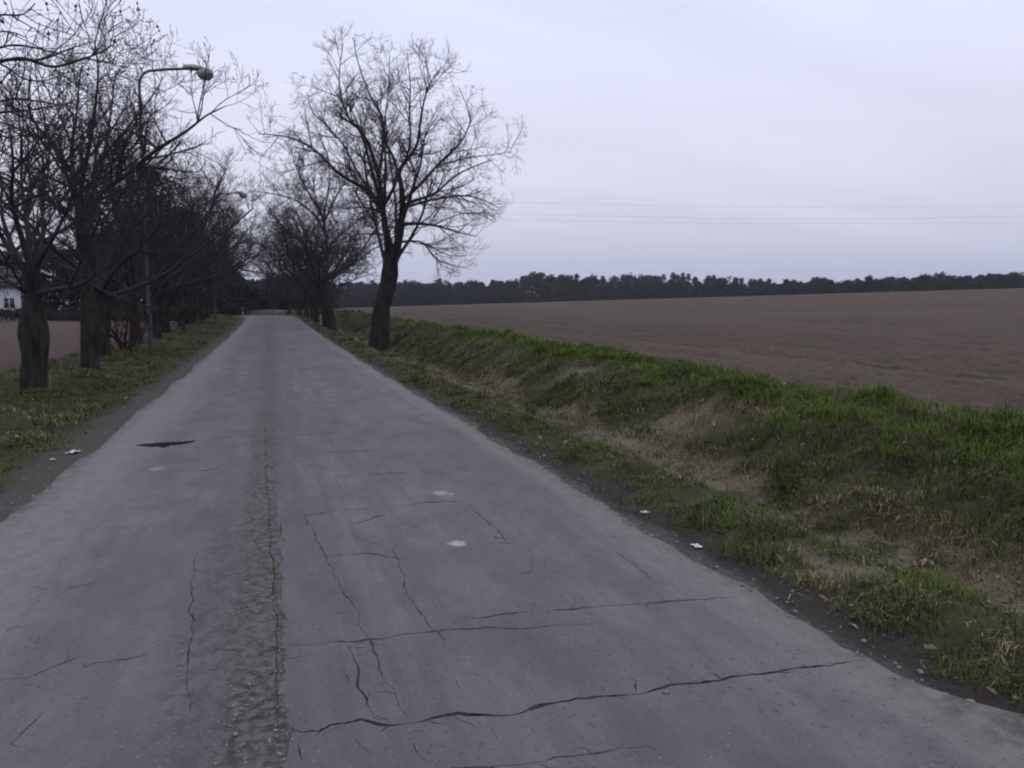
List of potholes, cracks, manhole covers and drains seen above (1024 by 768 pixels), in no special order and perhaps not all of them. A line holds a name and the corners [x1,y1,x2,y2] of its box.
crack [279,501,862,762]
crack [10,712,43,747]
crack [4,654,147,689]
crack [173,552,243,712]
